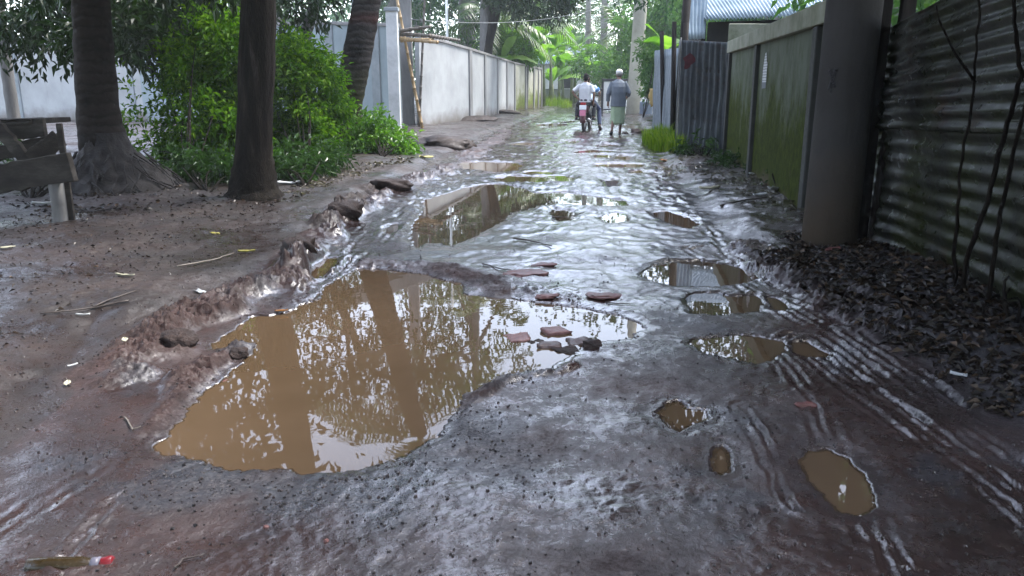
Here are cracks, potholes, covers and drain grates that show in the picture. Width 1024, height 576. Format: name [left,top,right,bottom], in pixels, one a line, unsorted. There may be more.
pothole [647,210,704,229]
pothole [785,338,836,360]
pothole [647,396,720,435]
pothole [633,257,766,287]
pothole [145,265,652,479]
pothole [683,330,788,365]
pothole [455,160,525,172]
pothole [680,290,767,316]
pothole [698,440,744,480]
pothole [404,182,635,248]
pothole [761,294,794,312]
pothole [788,443,887,522]
